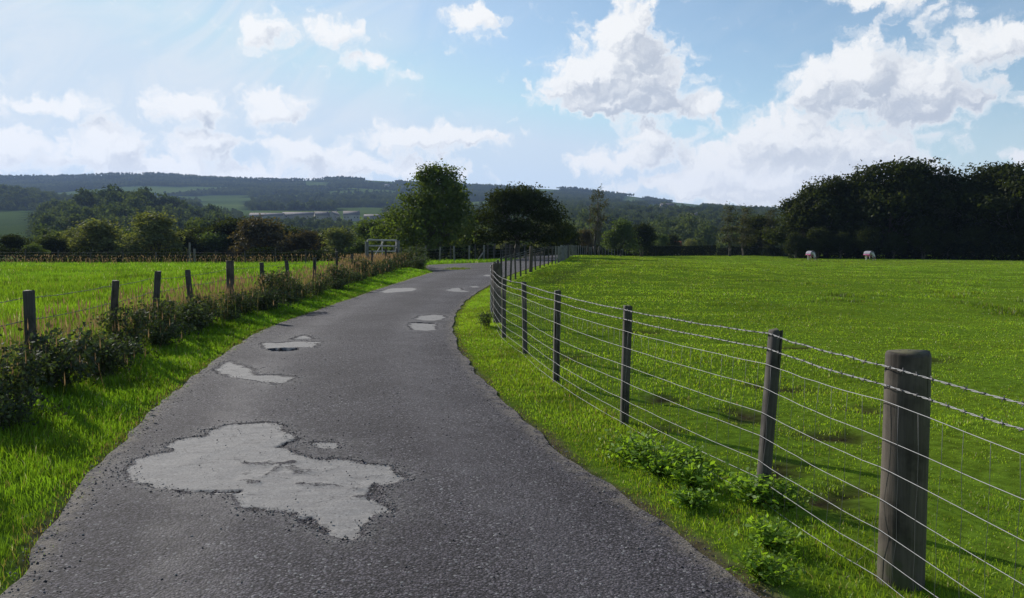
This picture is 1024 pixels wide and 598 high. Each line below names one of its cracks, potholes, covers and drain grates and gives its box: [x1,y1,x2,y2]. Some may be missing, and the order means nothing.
pothole [259,341,325,351]
